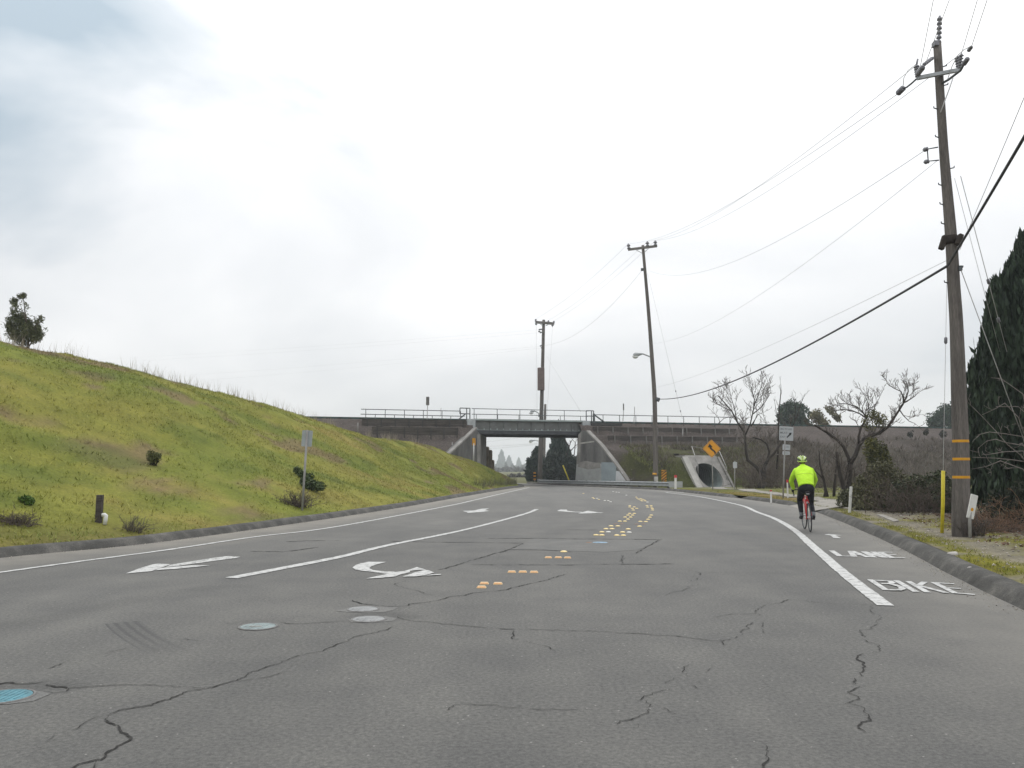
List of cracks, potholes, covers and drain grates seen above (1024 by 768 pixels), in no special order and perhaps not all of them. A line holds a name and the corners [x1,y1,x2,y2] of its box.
crack [0,627,391,768]
crack [352,563,881,732]
manhole cover [0,688,37,704]
